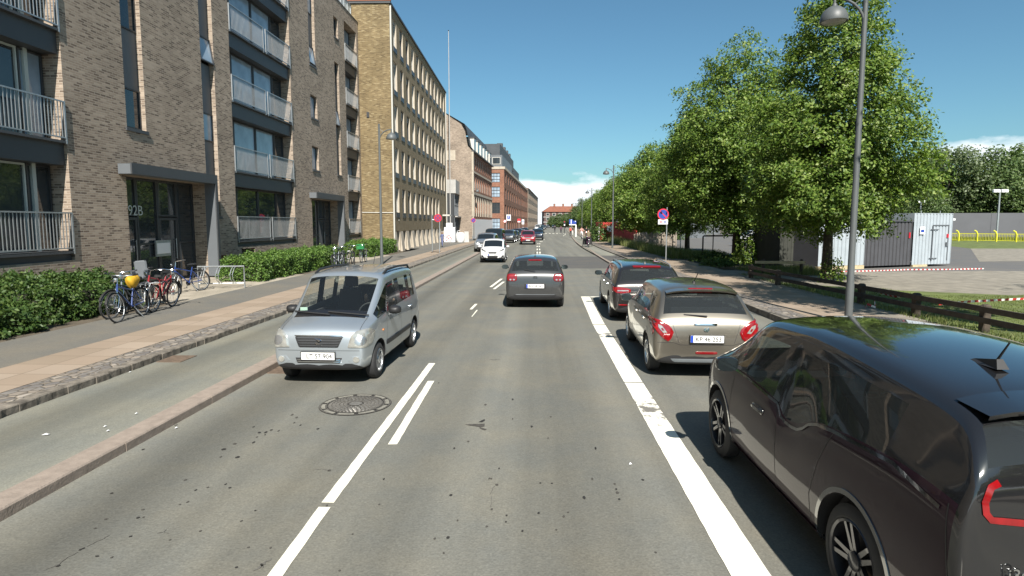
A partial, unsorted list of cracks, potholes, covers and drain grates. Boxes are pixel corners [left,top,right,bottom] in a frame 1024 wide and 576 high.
manhole cover [319,394,392,416]
